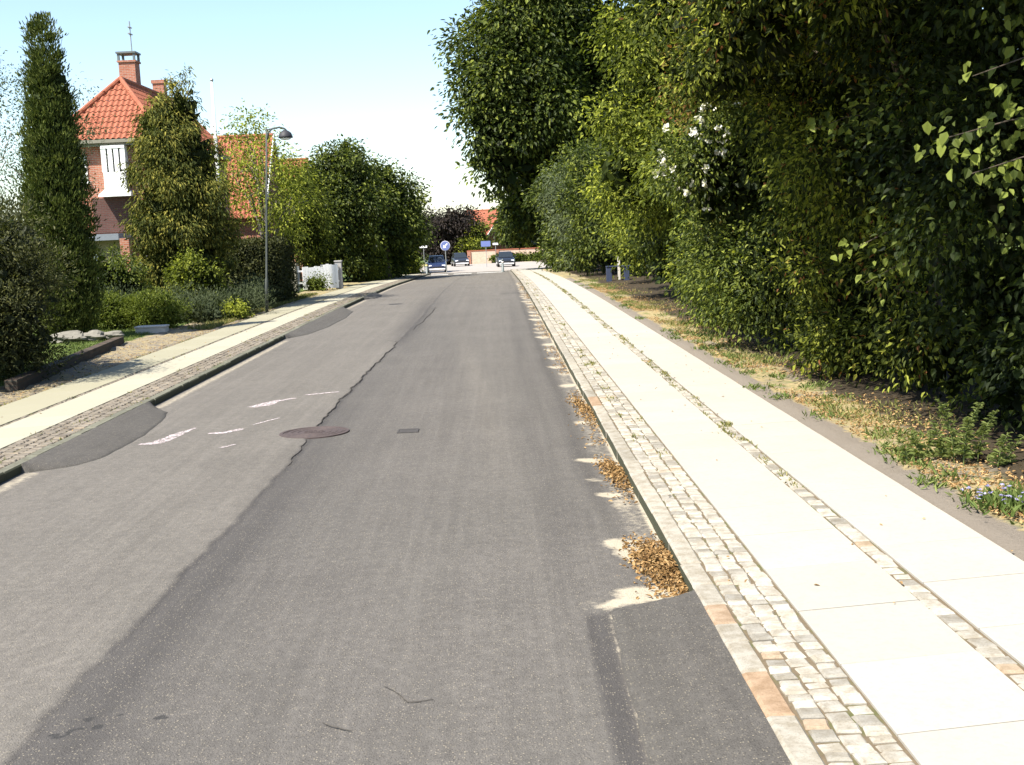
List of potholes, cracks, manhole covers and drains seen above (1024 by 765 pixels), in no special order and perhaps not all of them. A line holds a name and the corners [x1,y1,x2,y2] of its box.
manhole cover [279,426,349,439]
crack [384,686,434,703]
